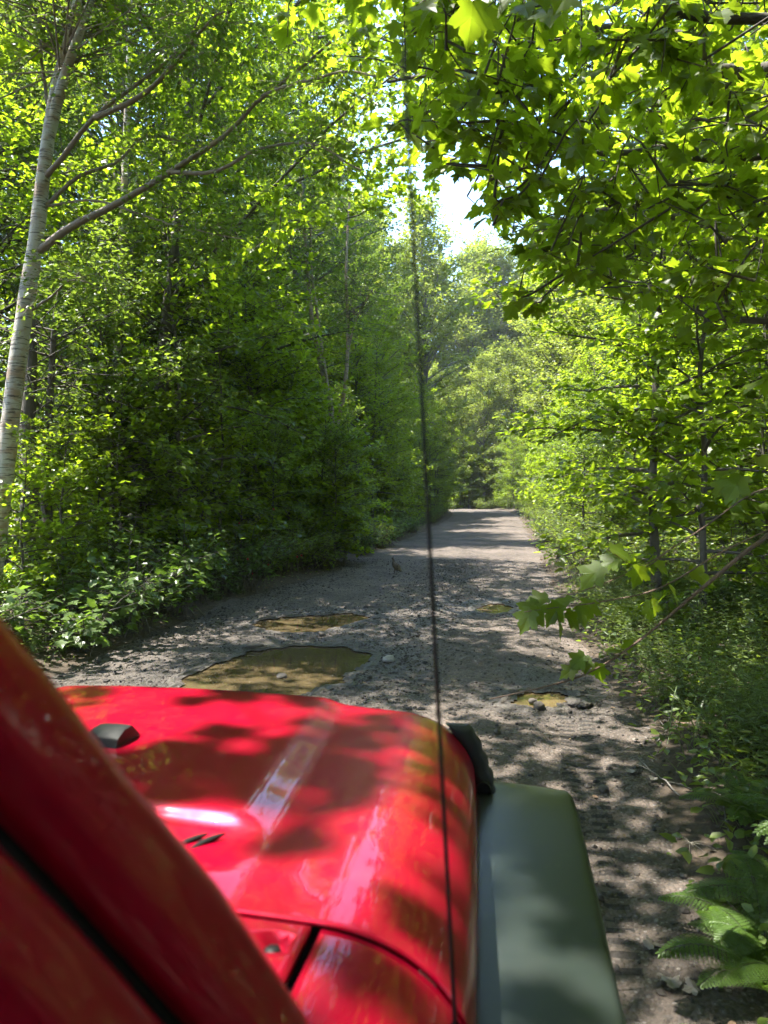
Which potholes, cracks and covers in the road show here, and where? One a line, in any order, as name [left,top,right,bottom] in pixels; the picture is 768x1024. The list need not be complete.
pothole [468,601,519,615]
pothole [166,642,382,696]
pothole [493,686,585,712]
pothole [239,610,378,635]
